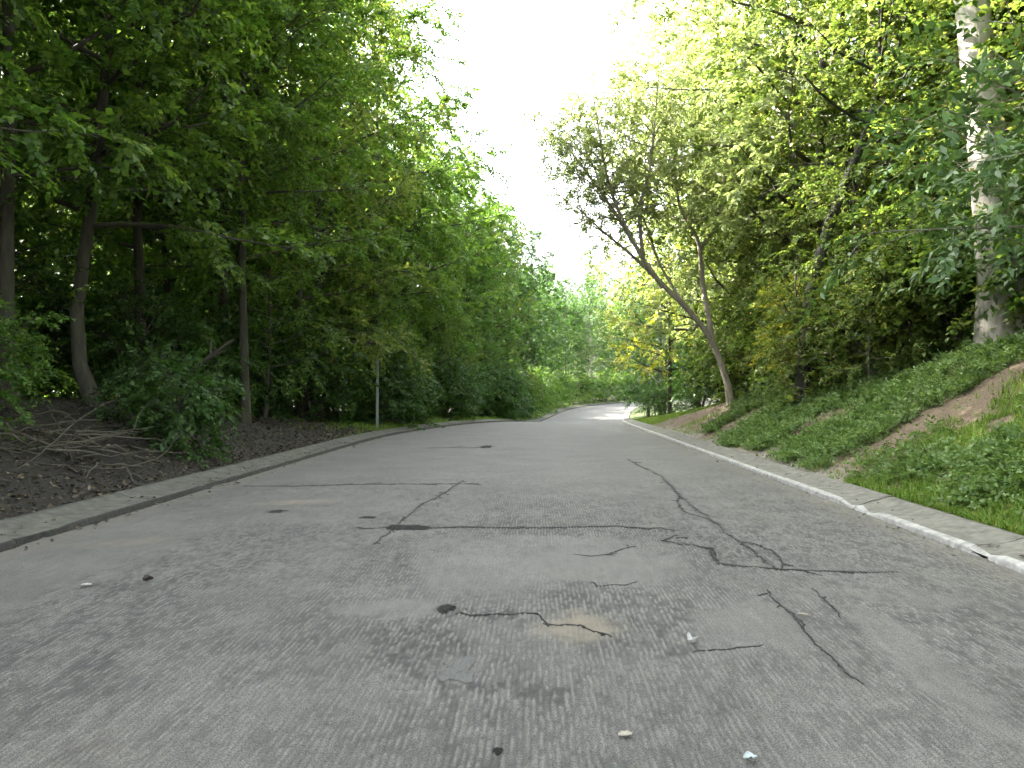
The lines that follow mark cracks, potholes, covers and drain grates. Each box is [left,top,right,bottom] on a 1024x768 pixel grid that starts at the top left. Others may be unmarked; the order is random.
crack [259,461,898,684]
pothole [437,604,456,614]
